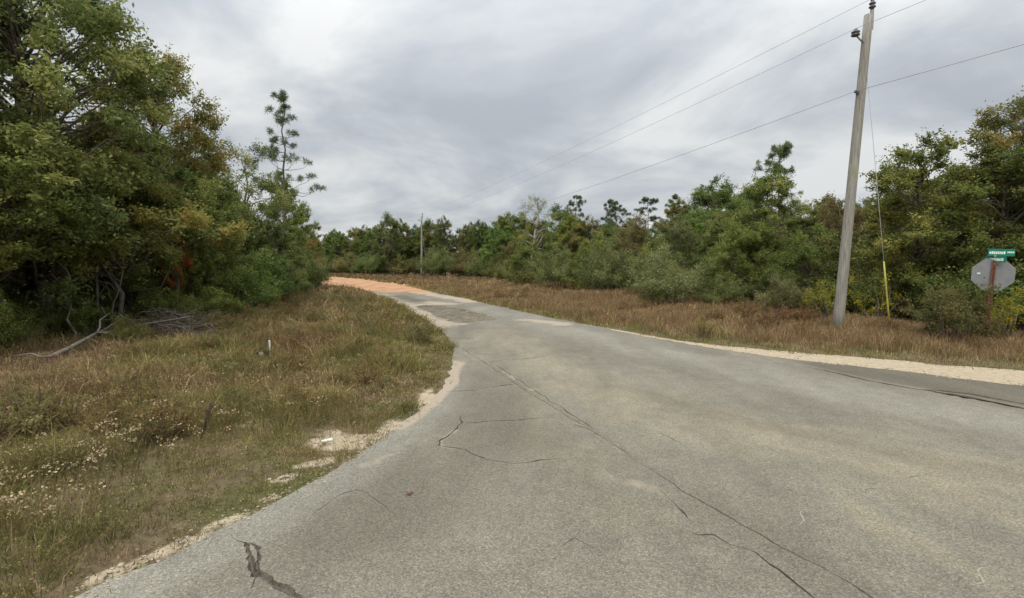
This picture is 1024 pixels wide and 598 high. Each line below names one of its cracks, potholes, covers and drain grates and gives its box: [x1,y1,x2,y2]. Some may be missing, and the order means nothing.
crack [312,489,398,517]
crack [446,349,874,598]
crack [227,532,303,598]
